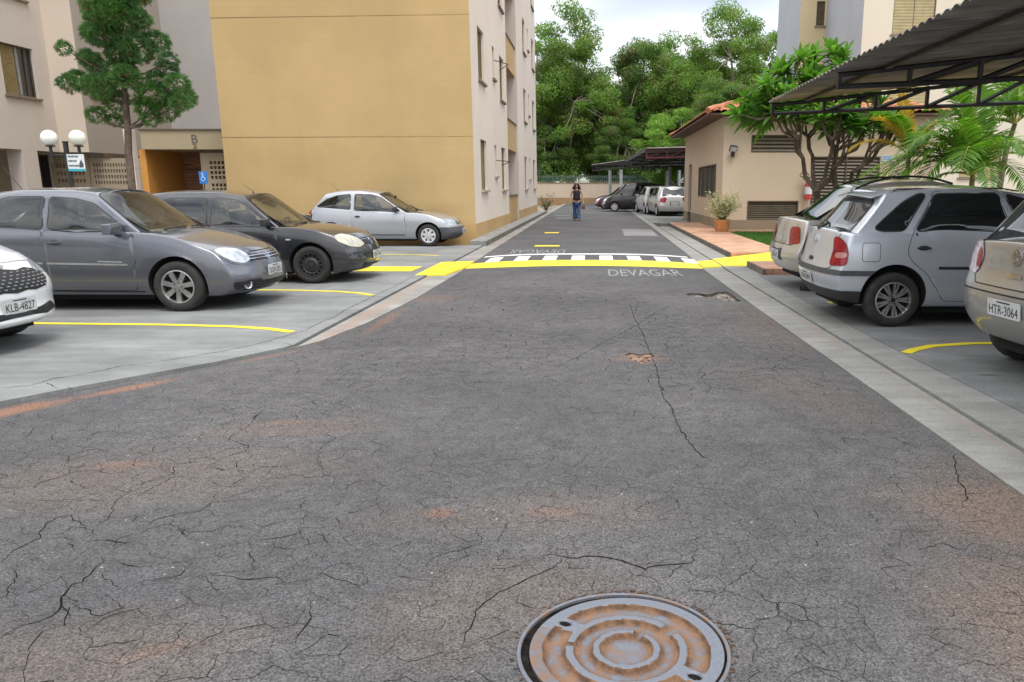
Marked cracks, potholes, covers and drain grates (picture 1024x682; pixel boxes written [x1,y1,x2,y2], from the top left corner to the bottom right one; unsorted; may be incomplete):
manhole cover [510,589,739,682]
pothole [686,291,741,301]
pothole [626,353,654,364]
crack [256,278,881,682]
crack [761,404,1024,682]
